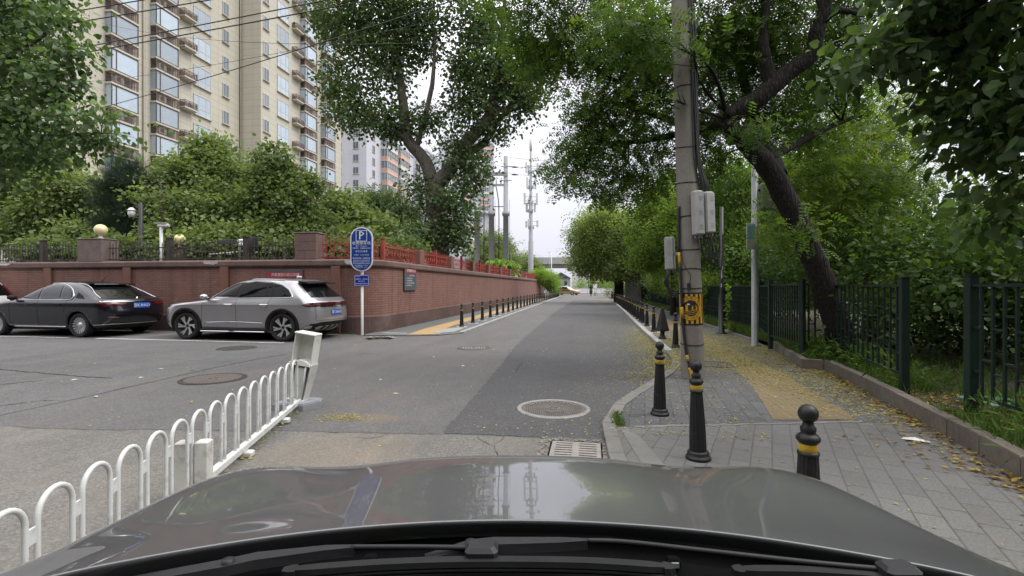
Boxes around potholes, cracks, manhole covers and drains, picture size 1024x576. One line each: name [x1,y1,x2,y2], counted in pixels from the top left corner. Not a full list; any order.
manhole cover [177,373,247,385]
manhole cover [517,399,591,419]
drain grate [537,436,608,459]
